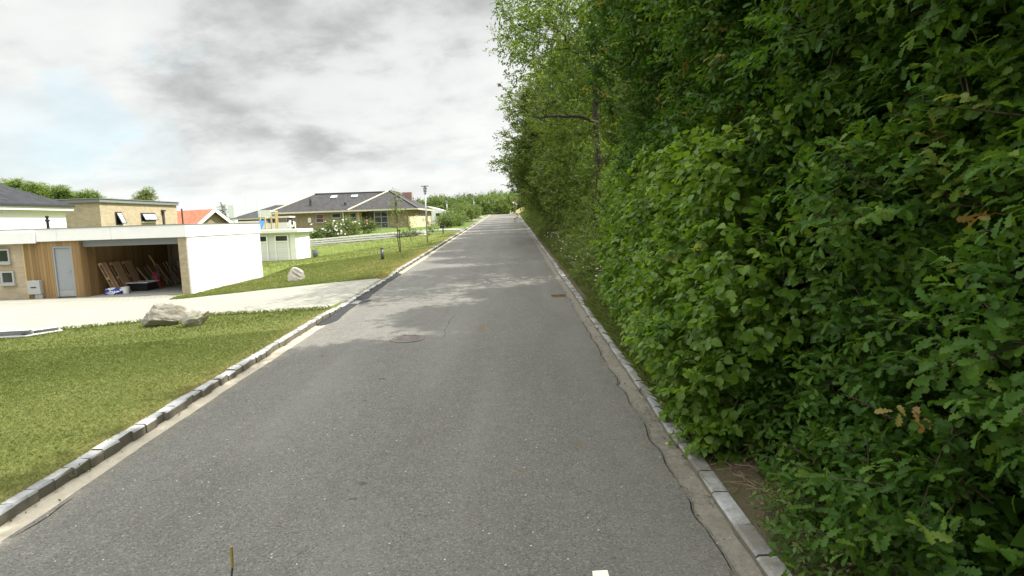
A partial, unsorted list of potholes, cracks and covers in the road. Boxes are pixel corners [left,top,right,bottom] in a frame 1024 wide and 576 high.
manhole cover [390,335,425,343]
